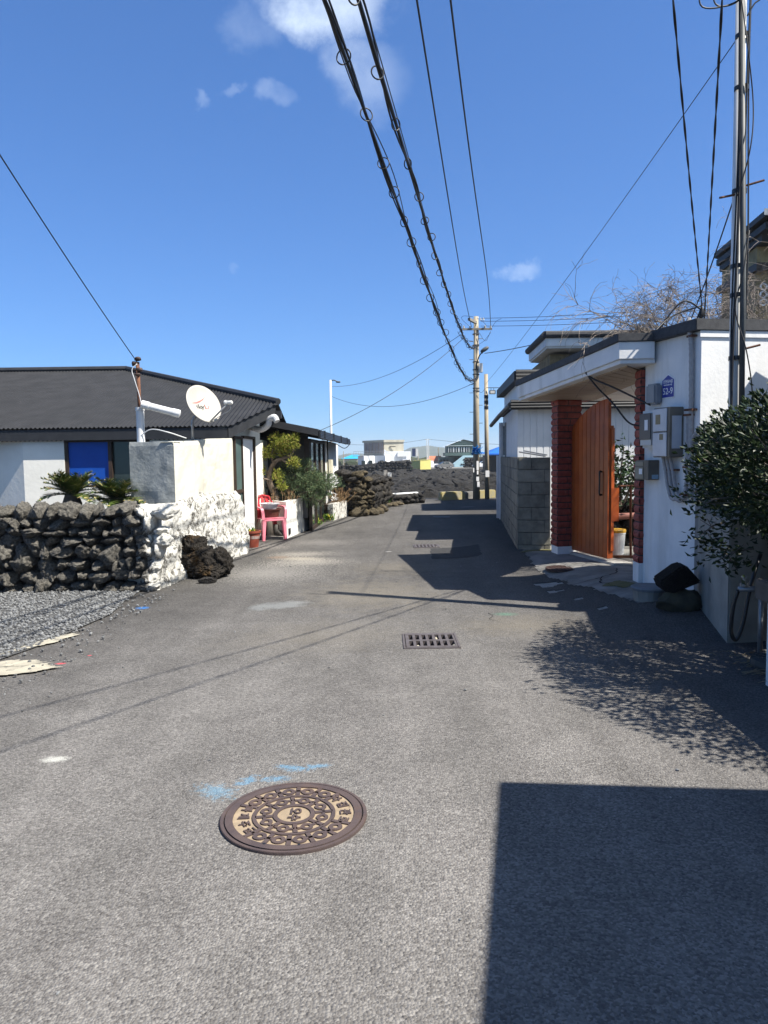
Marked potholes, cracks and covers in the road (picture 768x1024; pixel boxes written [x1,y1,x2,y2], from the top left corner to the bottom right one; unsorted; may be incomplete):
drain grate [402,633,461,649]
manhole cover [220,782,367,856]
